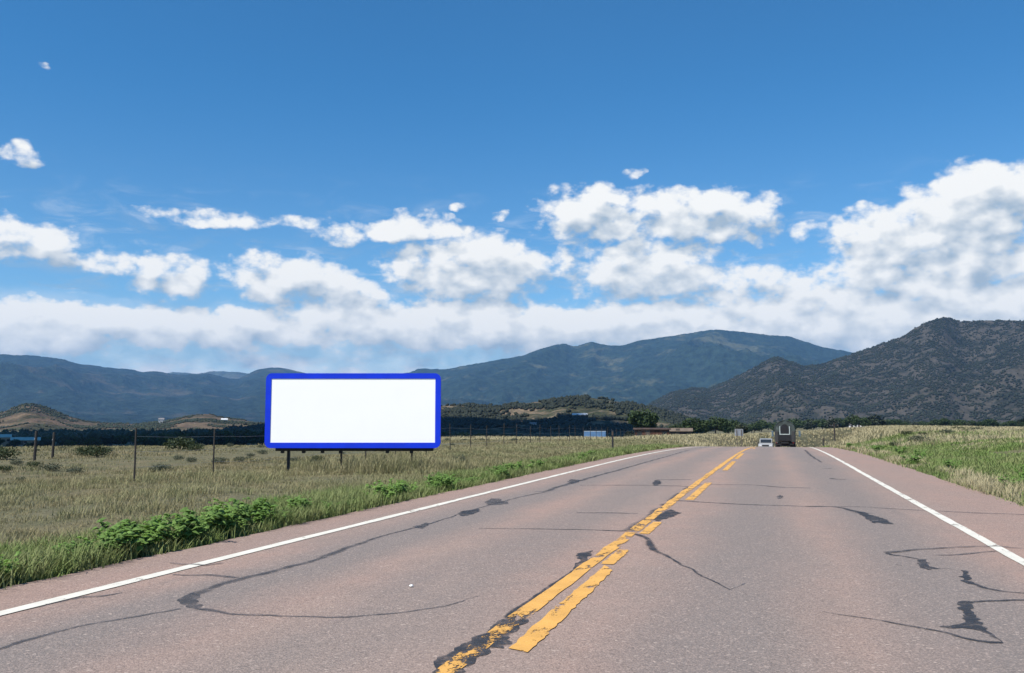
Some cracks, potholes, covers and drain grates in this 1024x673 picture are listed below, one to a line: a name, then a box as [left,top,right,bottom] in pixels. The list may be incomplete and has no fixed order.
crack [824,611,1003,643]
crack [656,479,1024,515]
crack [488,512,745,590]
crack [199,596,477,618]
crack [887,546,1016,569]
